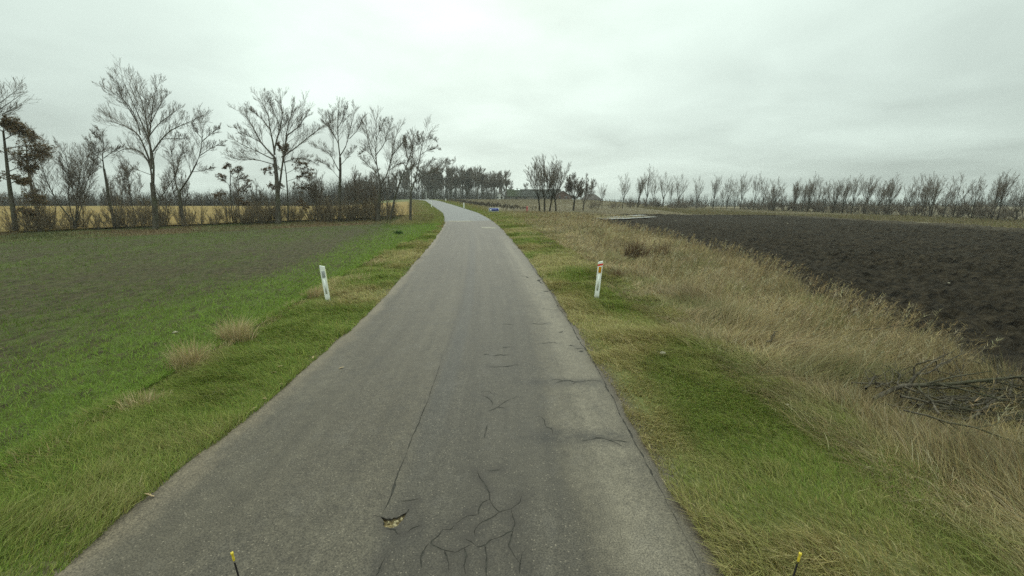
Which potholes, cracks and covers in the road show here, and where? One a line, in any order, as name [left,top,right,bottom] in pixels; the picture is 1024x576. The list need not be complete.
crack [527,271,705,575]
crack [408,470,522,576]
pothole [381,512,408,528]
